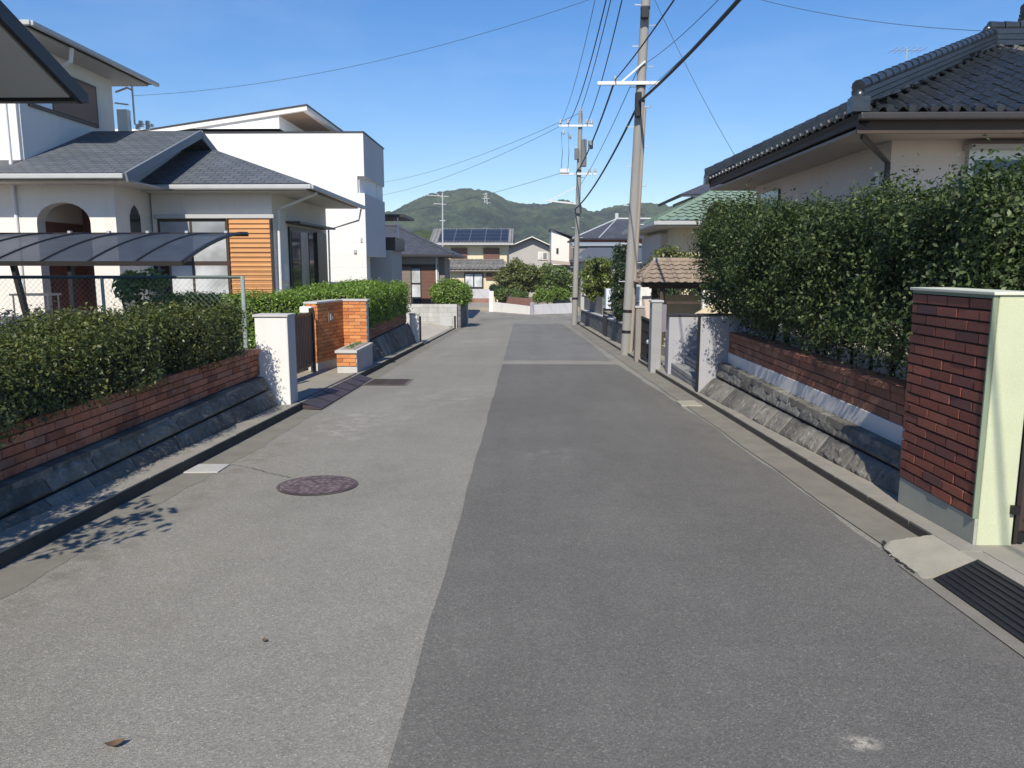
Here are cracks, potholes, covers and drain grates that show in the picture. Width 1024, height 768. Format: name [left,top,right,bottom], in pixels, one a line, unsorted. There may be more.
manhole cover [276,475,358,495]
crack [881,540,915,573]
